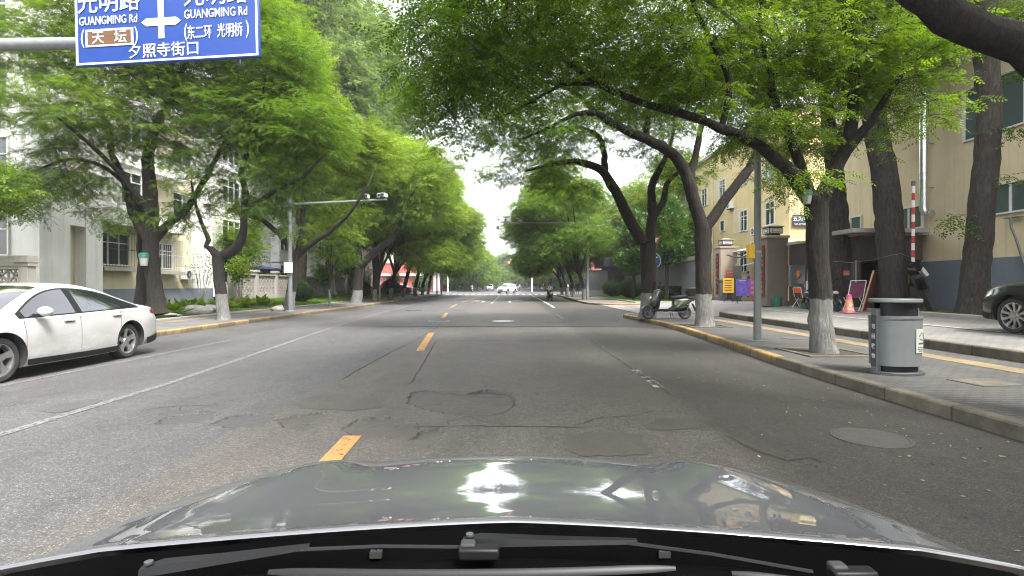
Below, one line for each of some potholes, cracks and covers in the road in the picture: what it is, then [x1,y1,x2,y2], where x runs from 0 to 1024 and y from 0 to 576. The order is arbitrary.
crack [731,437,825,463]
manhole cover [830,427,916,449]
crack [420,398,650,427]
crack [342,319,468,384]
